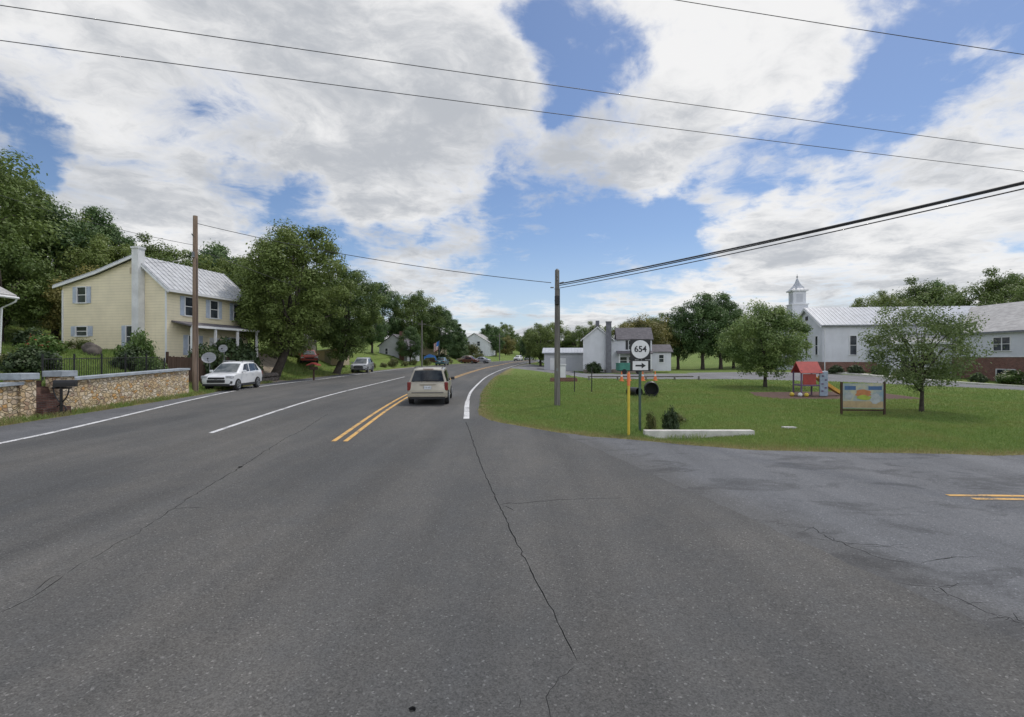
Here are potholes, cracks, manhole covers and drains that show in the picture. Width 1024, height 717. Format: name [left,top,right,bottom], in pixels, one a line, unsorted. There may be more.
crack [902,583,1024,624]
crack [781,523,915,562]
crack [466,423,599,713]
